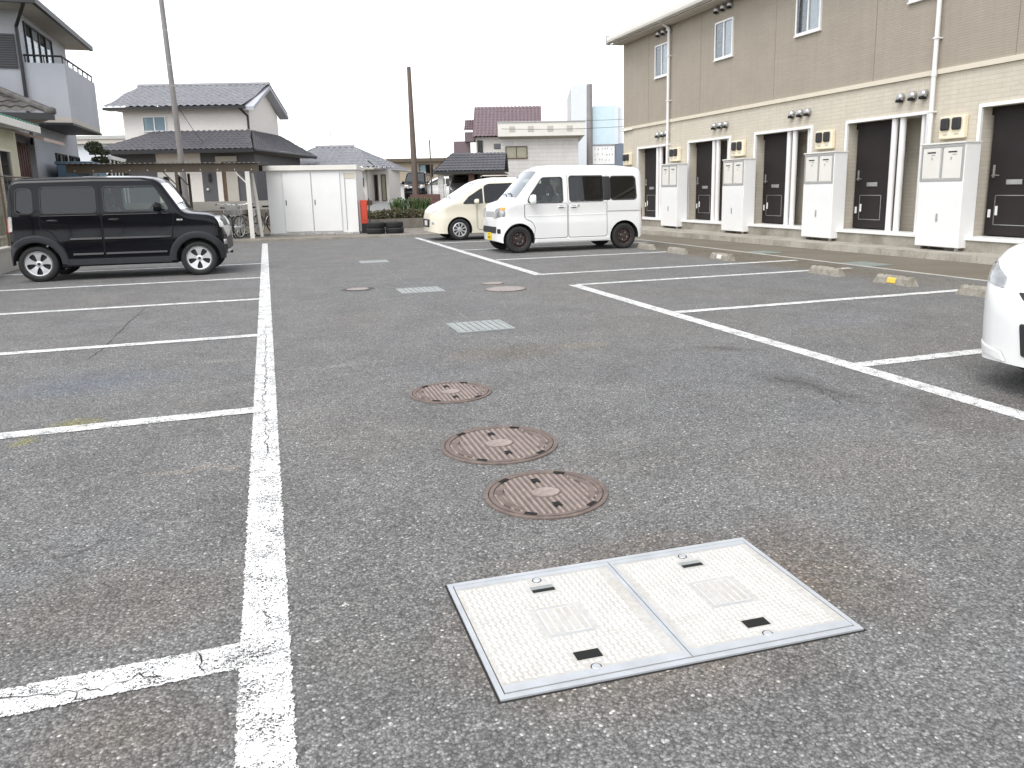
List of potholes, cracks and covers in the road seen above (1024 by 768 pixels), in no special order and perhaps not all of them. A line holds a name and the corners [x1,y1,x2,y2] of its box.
manhole cover [409,382,492,404]
crack [0,669,163,700]
manhole cover [440,425,558,465]
manhole cover [484,470,608,520]
crack [260,327,272,453]
drain grate [396,286,445,294]
drain grate [446,319,516,333]
manhole cover [444,537,867,704]
